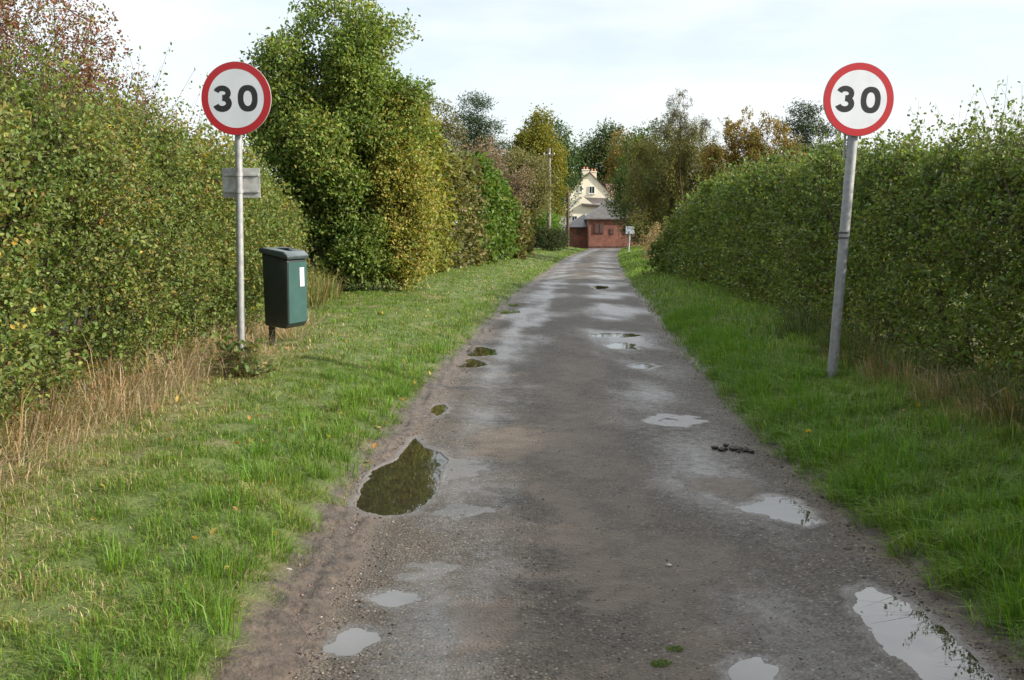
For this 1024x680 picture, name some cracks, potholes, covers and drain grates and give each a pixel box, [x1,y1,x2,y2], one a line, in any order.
pothole [457,358,490,368]
pothole [353,437,452,517]
pothole [602,342,639,350]
pothole [424,403,450,419]
pothole [466,346,499,357]
